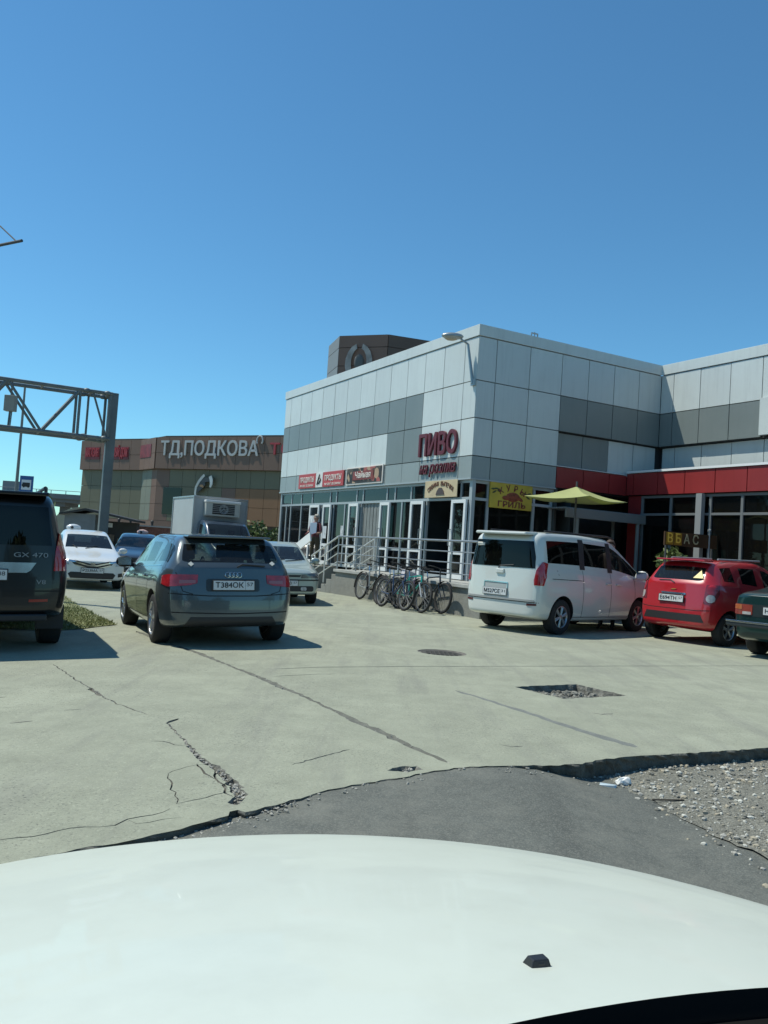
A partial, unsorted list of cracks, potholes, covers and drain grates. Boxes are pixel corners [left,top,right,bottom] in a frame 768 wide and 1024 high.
crack [0,719,597,841]
crack [53,664,145,714]
pothole [517,684,626,699]
